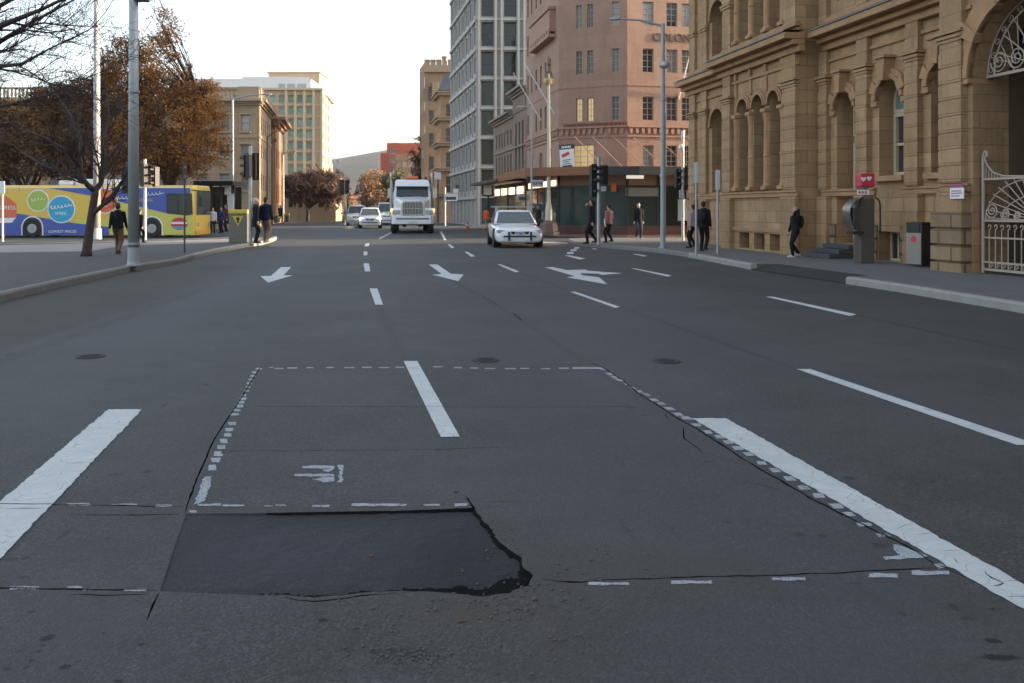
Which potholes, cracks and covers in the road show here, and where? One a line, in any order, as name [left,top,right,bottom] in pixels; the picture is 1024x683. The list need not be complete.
pothole [160,508,533,597]
crack [545,560,1021,586]
